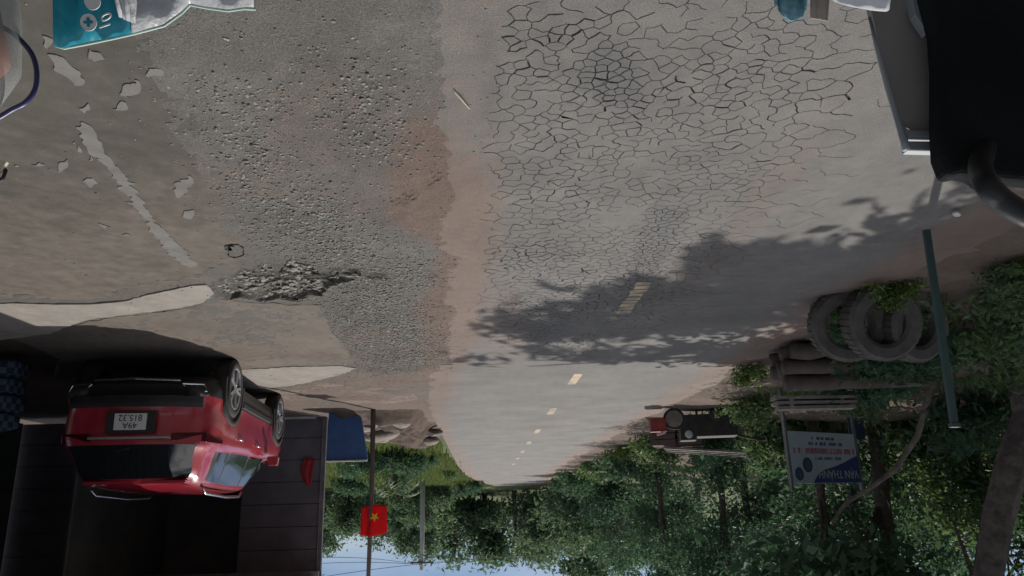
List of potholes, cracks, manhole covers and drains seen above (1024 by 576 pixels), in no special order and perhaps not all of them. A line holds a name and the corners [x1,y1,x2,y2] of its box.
pothole [209,257,361,303]
crack [492,1,853,343]
